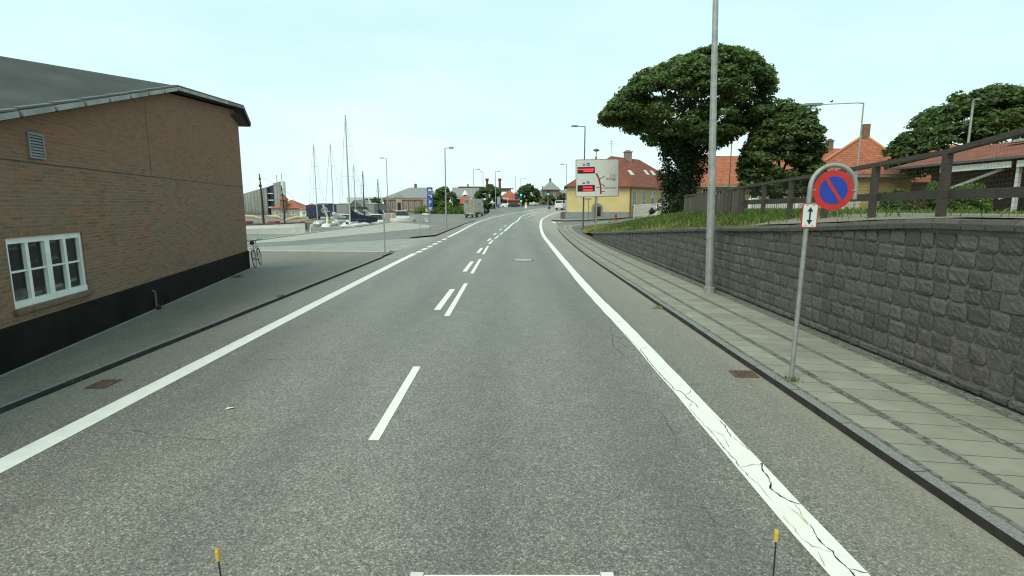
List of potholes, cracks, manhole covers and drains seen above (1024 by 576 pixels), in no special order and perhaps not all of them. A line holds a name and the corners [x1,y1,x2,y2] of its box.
crack [610,321,867,576]
drain grate [84,379,122,389]
drain grate [729,370,760,378]
